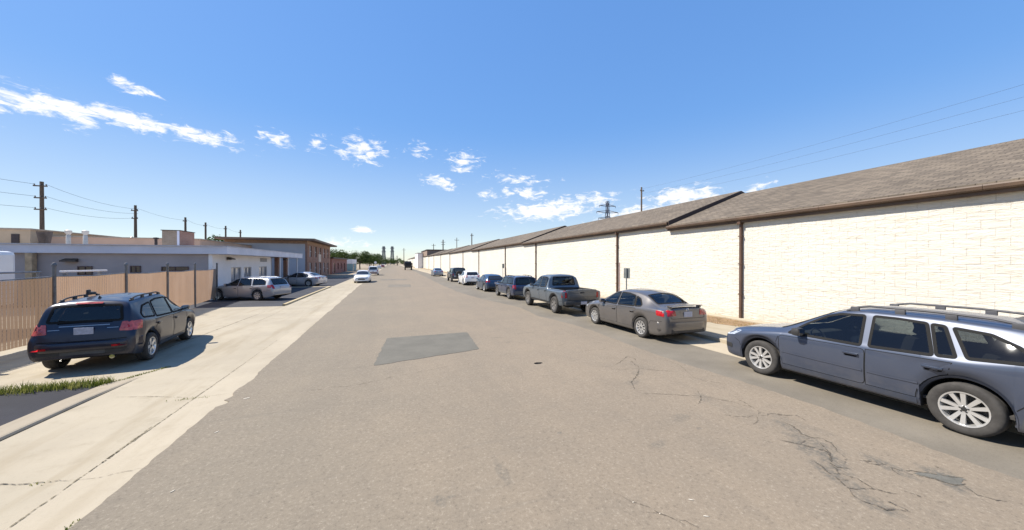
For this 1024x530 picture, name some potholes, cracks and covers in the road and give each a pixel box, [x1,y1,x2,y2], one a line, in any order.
crack [619,356,1003,512]
